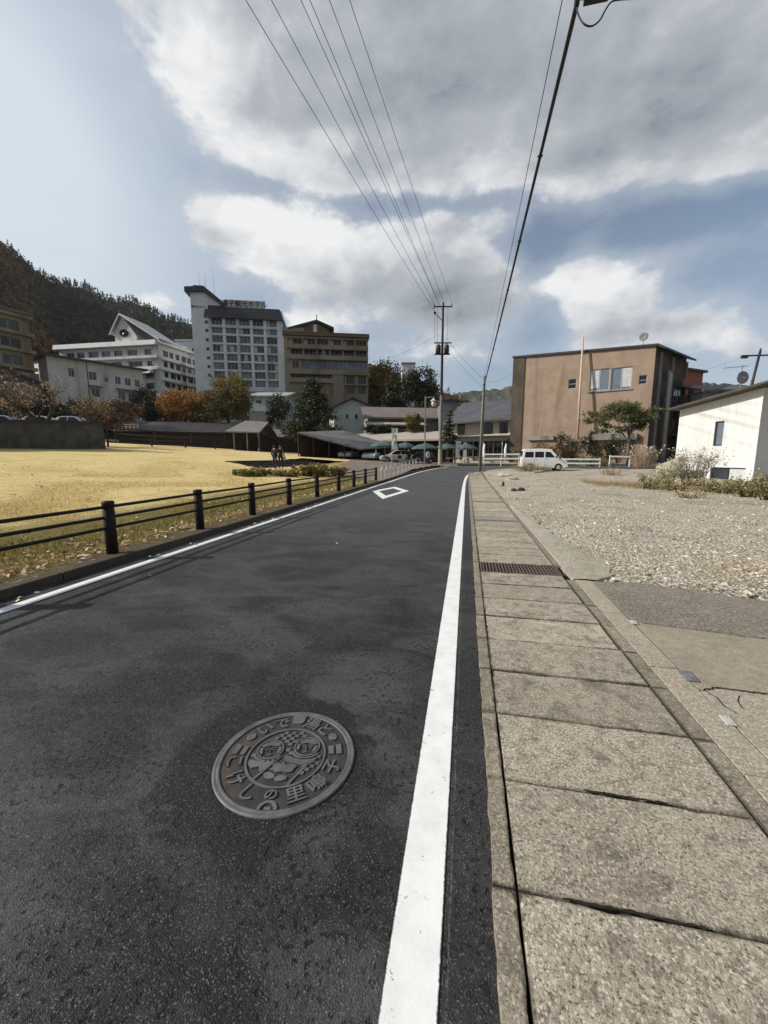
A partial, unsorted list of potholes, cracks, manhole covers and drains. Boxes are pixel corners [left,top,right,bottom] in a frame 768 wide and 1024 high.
drain grate [480,562,563,577]
manhole cover [212,712,355,819]
crack [704,687,768,714]
